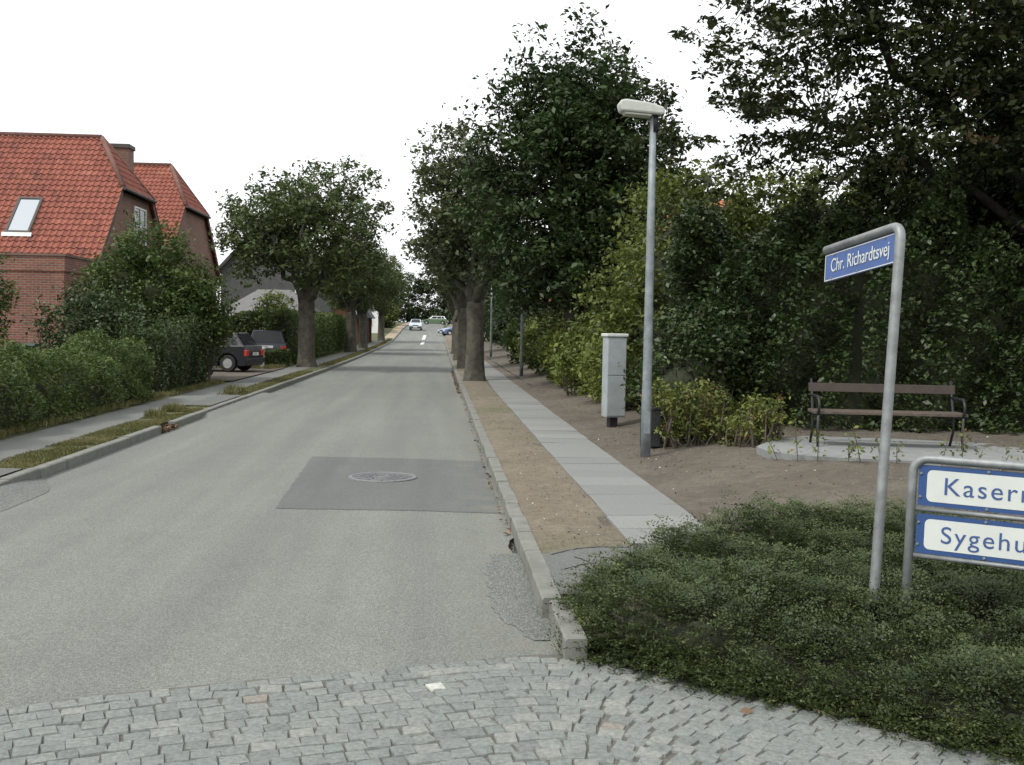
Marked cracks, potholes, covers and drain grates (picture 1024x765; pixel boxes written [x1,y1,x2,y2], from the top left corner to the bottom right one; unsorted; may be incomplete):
manhole cover [348,472,417,482]
